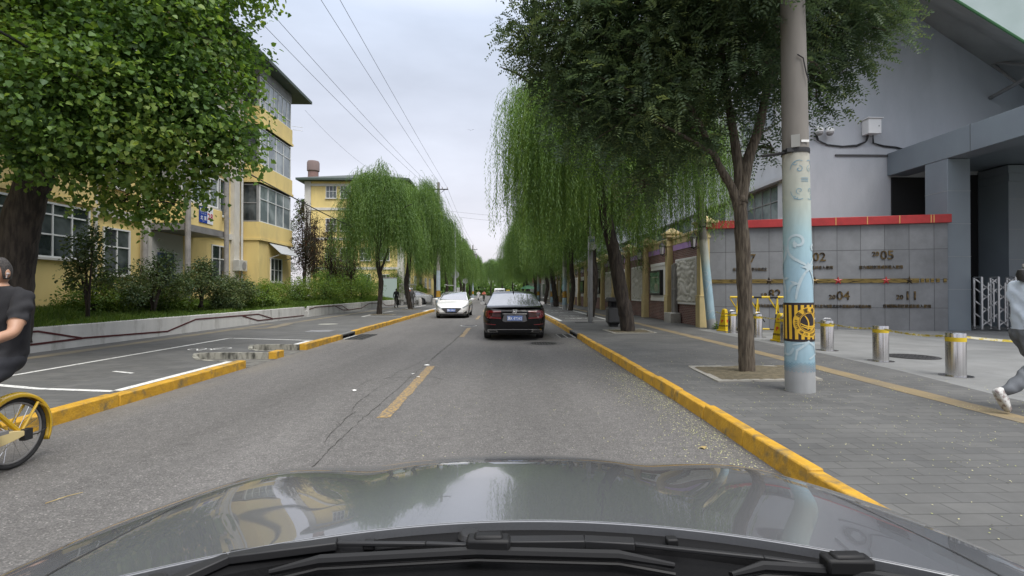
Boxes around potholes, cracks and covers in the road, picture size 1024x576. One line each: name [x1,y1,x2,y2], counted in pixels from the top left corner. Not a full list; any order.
crack [312,337,458,467]
